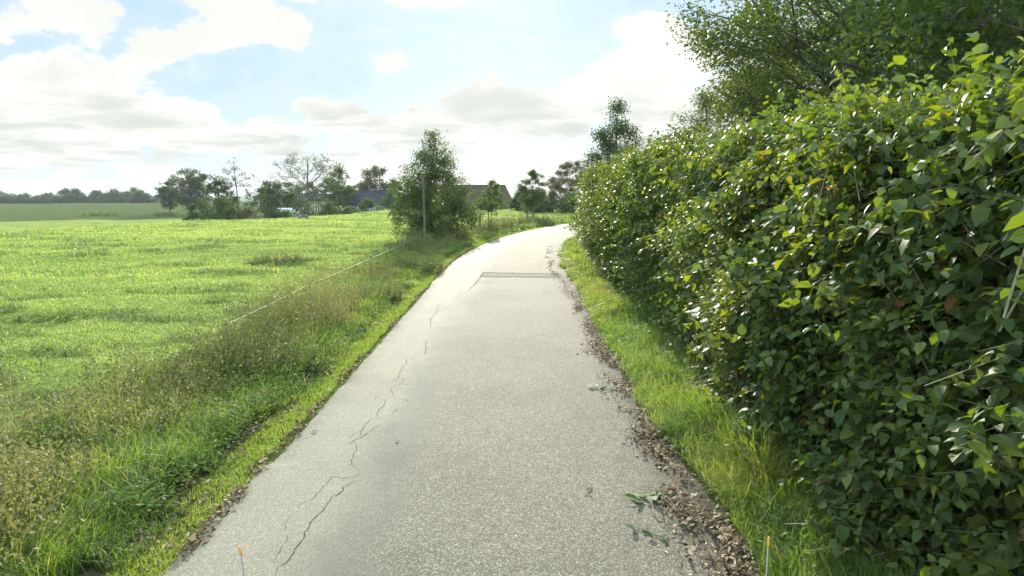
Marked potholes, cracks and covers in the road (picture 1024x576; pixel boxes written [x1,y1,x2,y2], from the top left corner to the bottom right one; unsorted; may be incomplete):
crack [275,304,440,576]
